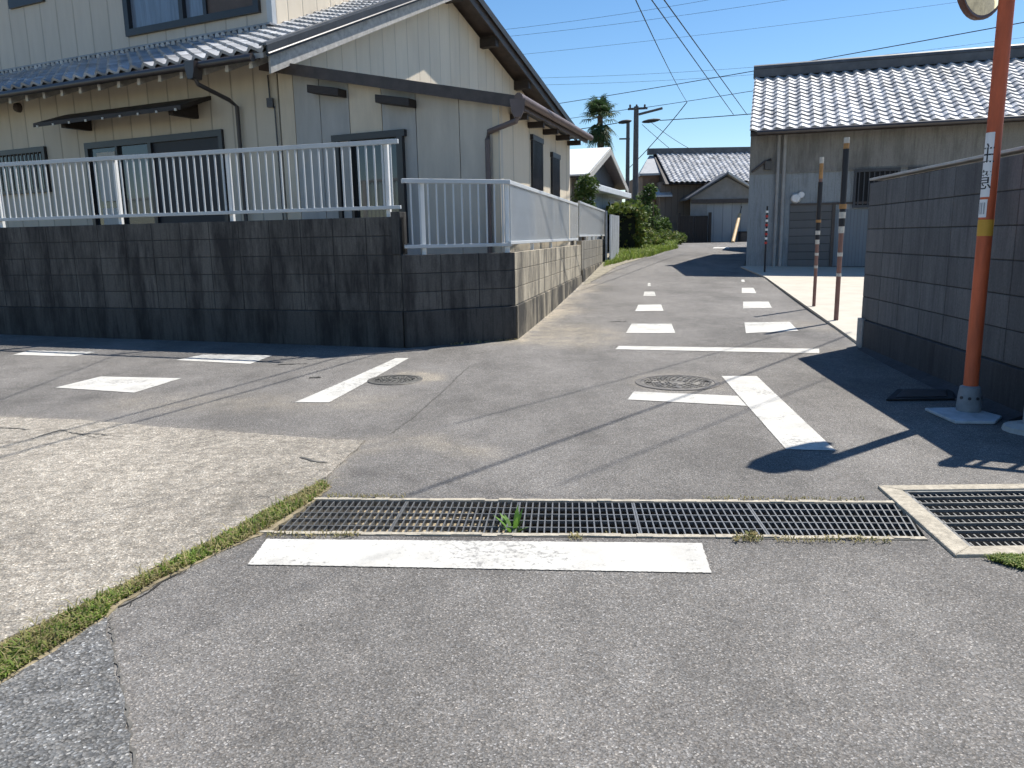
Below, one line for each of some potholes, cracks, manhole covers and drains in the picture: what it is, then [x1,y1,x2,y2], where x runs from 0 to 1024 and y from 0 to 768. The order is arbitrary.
drain grate [747,503,921,536]
drain grate [277,500,407,532]
drain grate [390,501,519,533]
manhole cover [635,375,721,391]
drain grate [514,501,640,534]
drain grate [633,502,768,535]
manhole cover [367,375,423,385]
